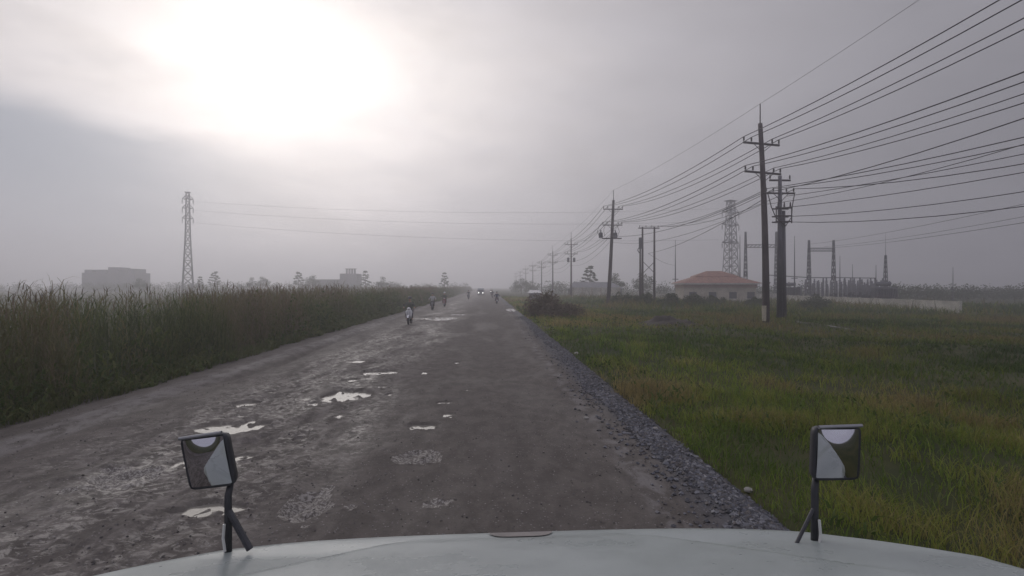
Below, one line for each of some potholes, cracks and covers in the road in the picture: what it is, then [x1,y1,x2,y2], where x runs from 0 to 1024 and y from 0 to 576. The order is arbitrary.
pothole [282,386,377,406]
pothole [357,368,404,376]
pothole [225,399,262,408]
pothole [403,421,443,431]
pothole [174,417,273,439]
pothole [158,498,252,520]
